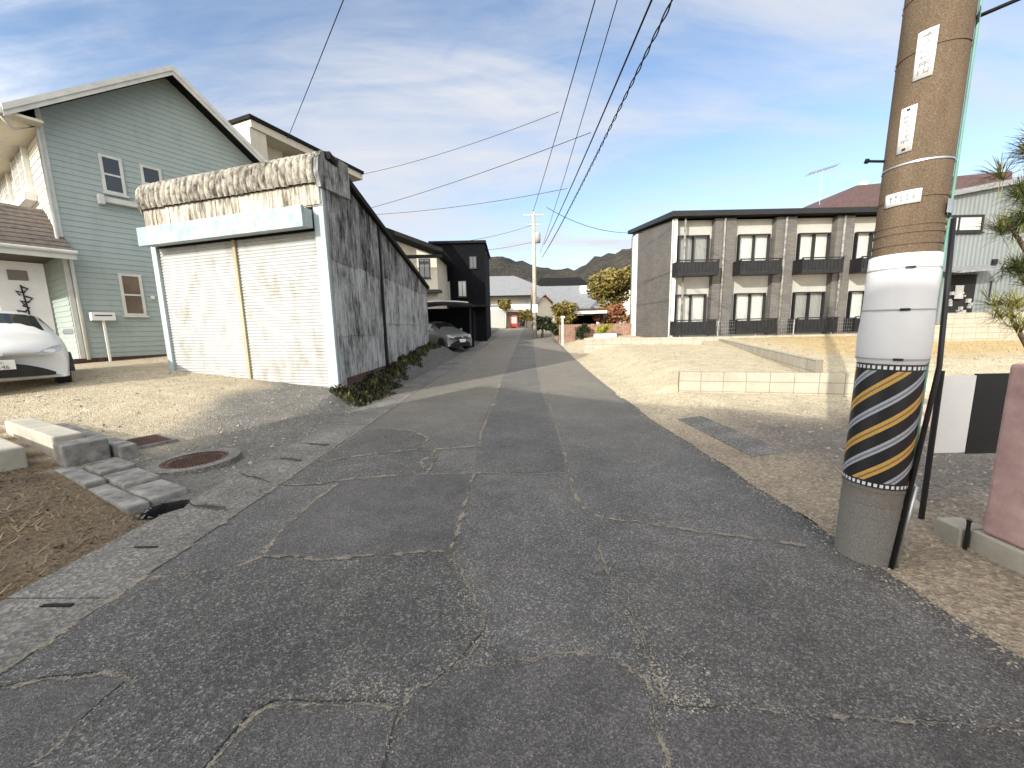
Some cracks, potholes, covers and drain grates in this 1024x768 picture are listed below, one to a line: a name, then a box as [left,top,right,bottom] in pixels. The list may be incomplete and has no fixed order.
crack [281,443,330,461]
crack [189,502,232,513]
pothole [136,497,197,520]
crack [206,540,1024,768]
crack [1,667,132,767]
manhole cover [145,448,241,476]
